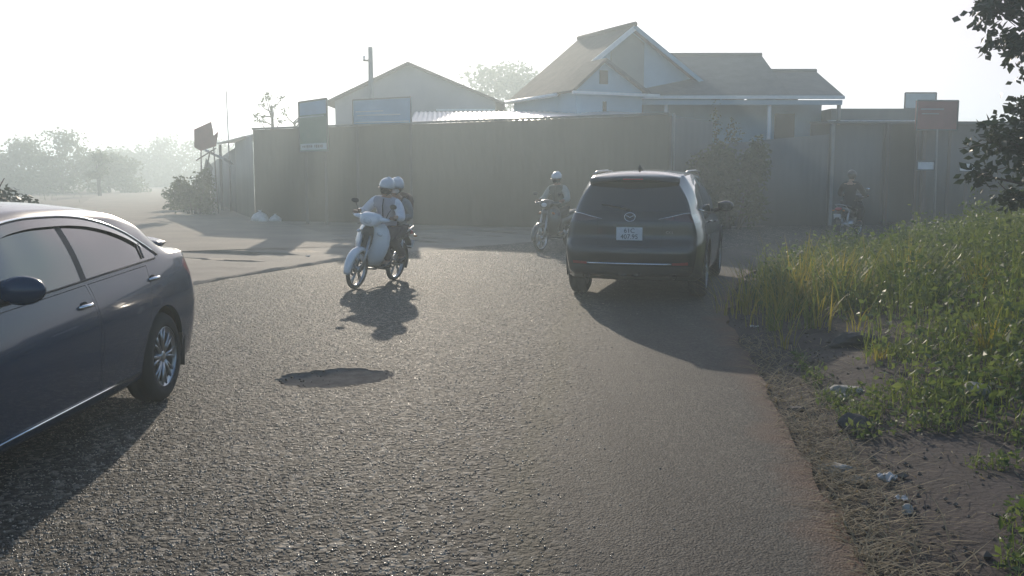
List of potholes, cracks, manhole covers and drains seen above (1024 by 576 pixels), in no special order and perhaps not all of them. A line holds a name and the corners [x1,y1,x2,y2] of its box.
pothole [274,368,395,388]
